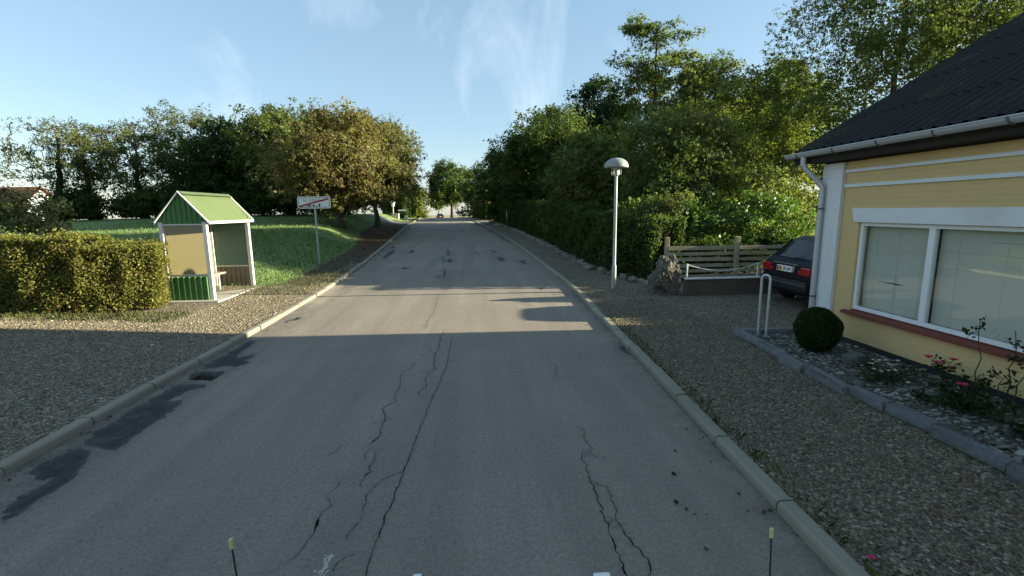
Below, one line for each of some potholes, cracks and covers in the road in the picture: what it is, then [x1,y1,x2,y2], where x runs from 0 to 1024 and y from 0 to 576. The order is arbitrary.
crack [359,295,444,485]
pothole [189,371,226,381]
crack [581,431,652,576]
